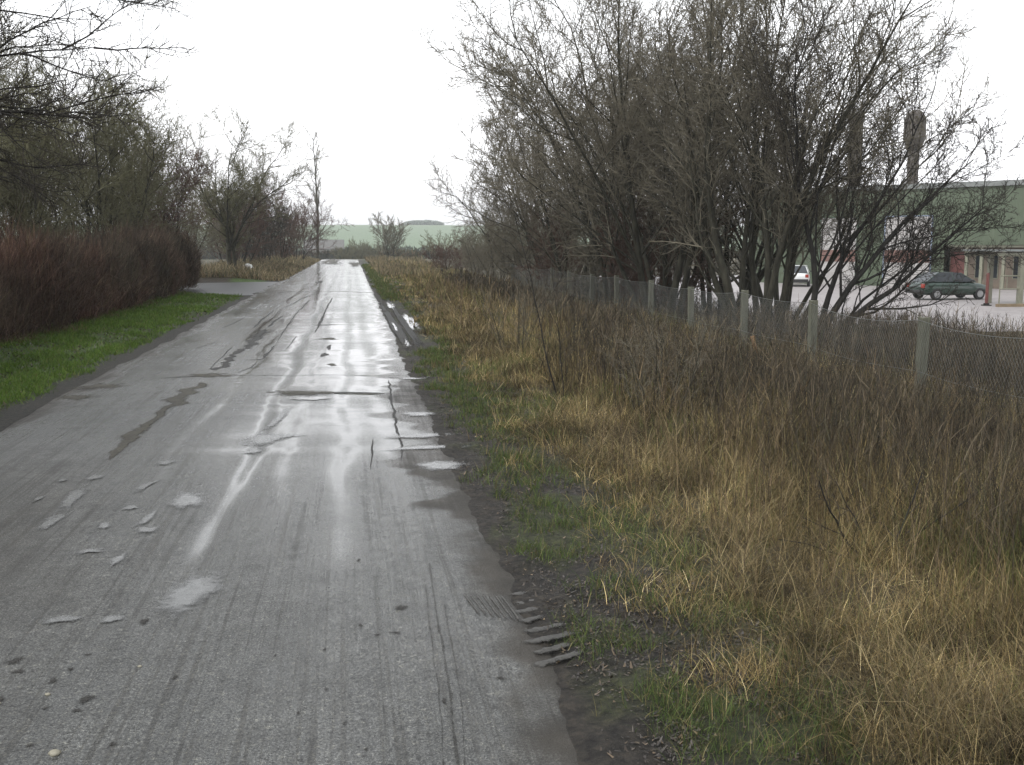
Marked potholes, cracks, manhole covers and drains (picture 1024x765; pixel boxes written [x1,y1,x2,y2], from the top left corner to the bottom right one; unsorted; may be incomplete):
crack [109,293,335,460]
crack [370,380,403,468]
